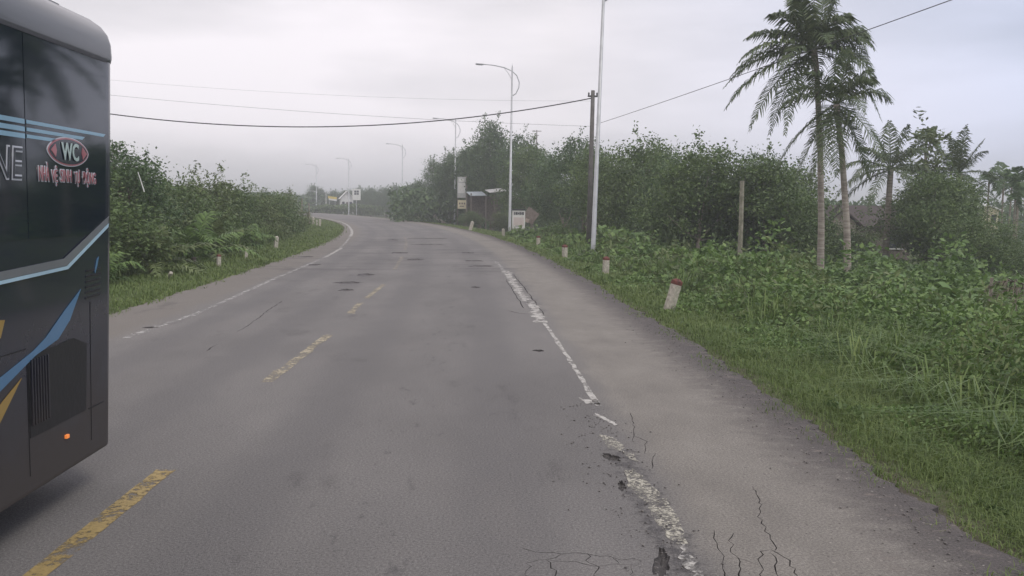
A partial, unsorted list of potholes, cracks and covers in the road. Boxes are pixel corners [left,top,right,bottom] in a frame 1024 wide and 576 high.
crack [521,547,641,576]
pothole [652,547,670,576]
crack [713,489,796,576]
